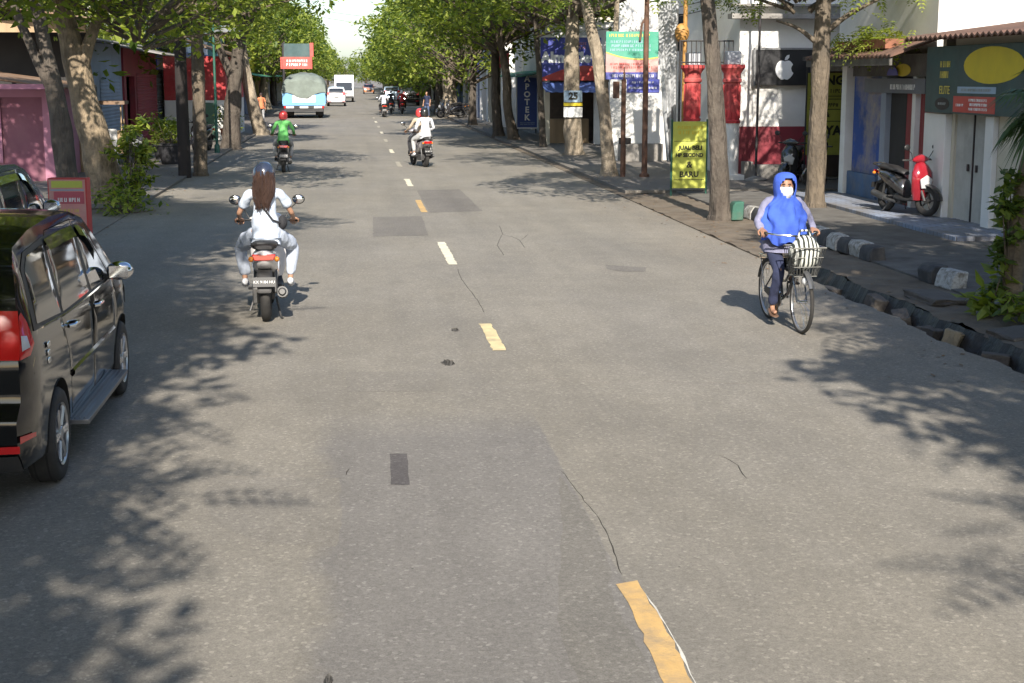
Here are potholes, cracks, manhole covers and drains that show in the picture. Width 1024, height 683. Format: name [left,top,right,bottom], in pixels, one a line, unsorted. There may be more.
crack [561,471,622,575]
